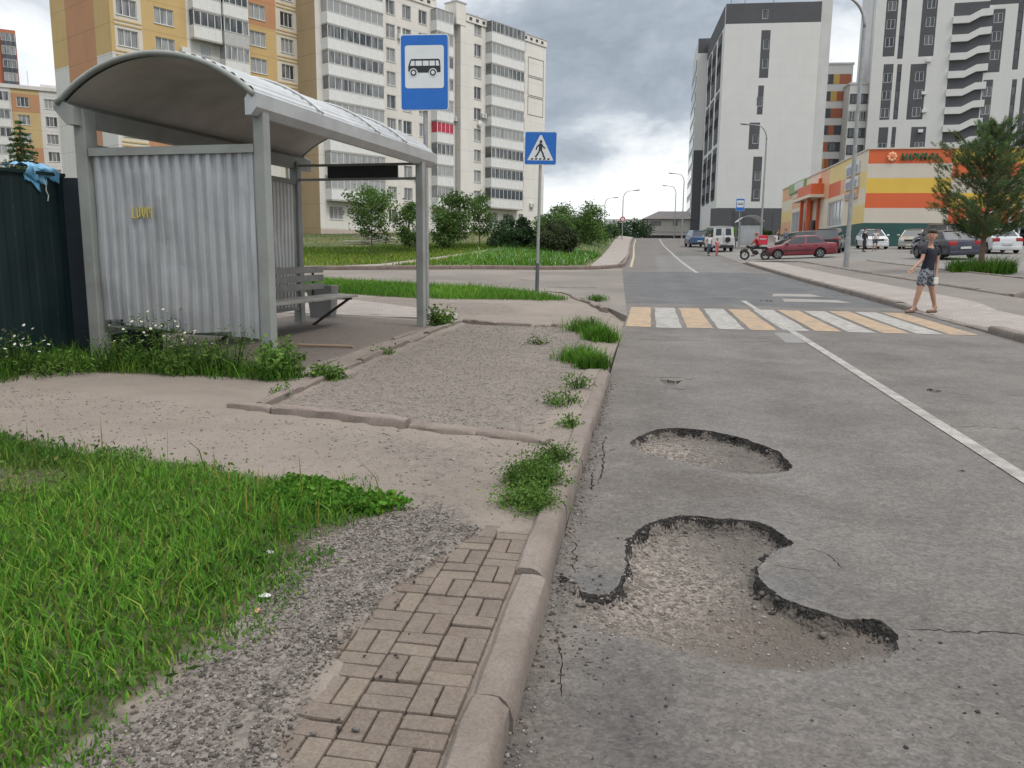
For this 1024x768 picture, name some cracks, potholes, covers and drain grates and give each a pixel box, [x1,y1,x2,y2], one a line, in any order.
crack [571,542,600,573]
pothole [550,515,899,673]
crack [590,438,615,491]
crack [897,626,1024,636]
pothole [630,428,793,474]
